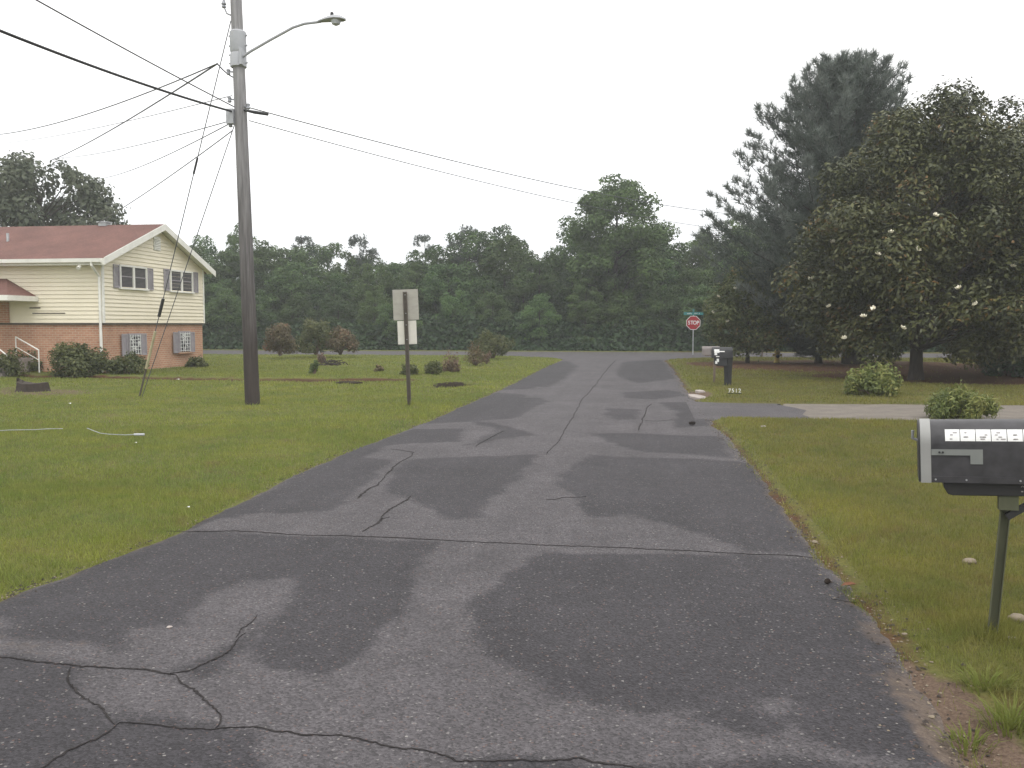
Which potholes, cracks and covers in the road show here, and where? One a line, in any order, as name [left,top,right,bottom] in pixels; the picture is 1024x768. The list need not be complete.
crack [181,449,813,558]
crack [0,614,645,768]
